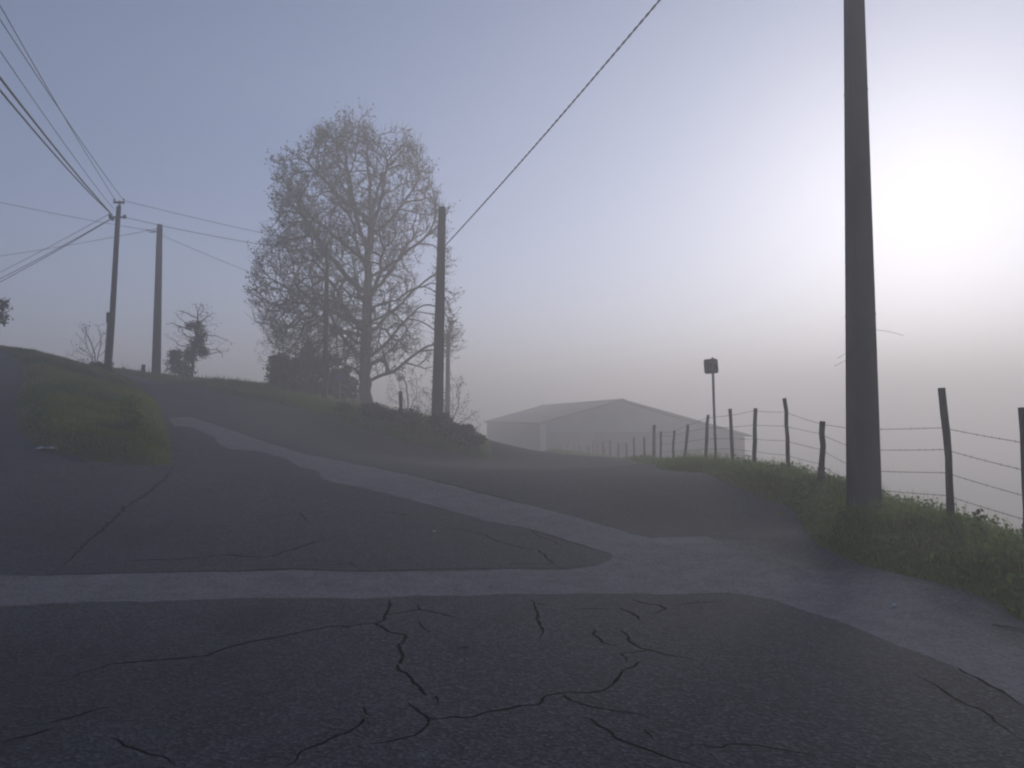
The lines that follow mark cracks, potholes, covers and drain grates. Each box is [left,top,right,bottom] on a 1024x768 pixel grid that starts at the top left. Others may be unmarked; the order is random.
crack [913,672,1023,741]
crack [43,598,813,768]
crack [449,525,613,568]
